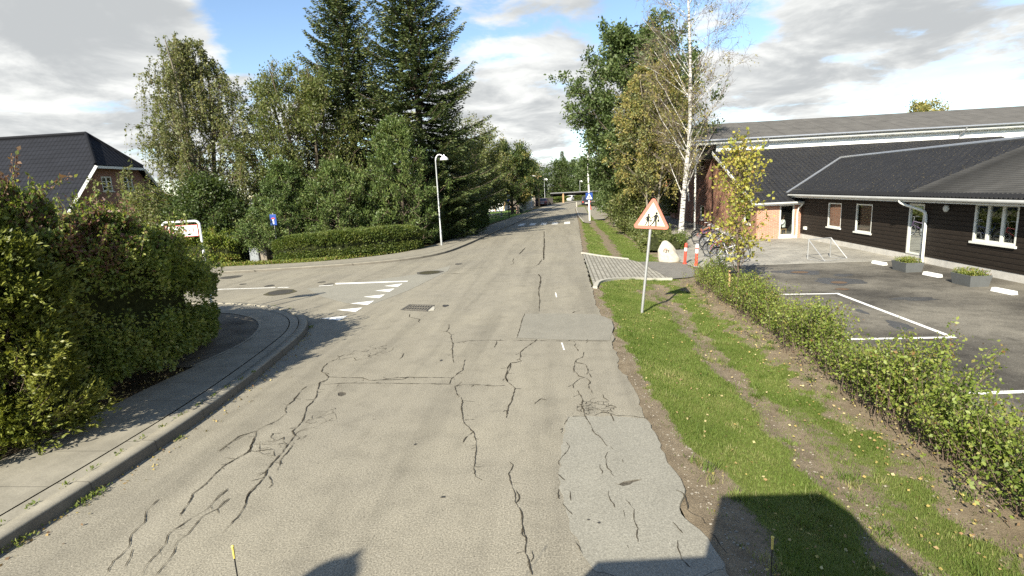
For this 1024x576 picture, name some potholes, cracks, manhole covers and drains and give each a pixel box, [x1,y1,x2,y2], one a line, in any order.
crack [108,328,546,575]
drain grate [401,304,435,312]
crack [572,345,644,548]
crack [513,234,545,308]
